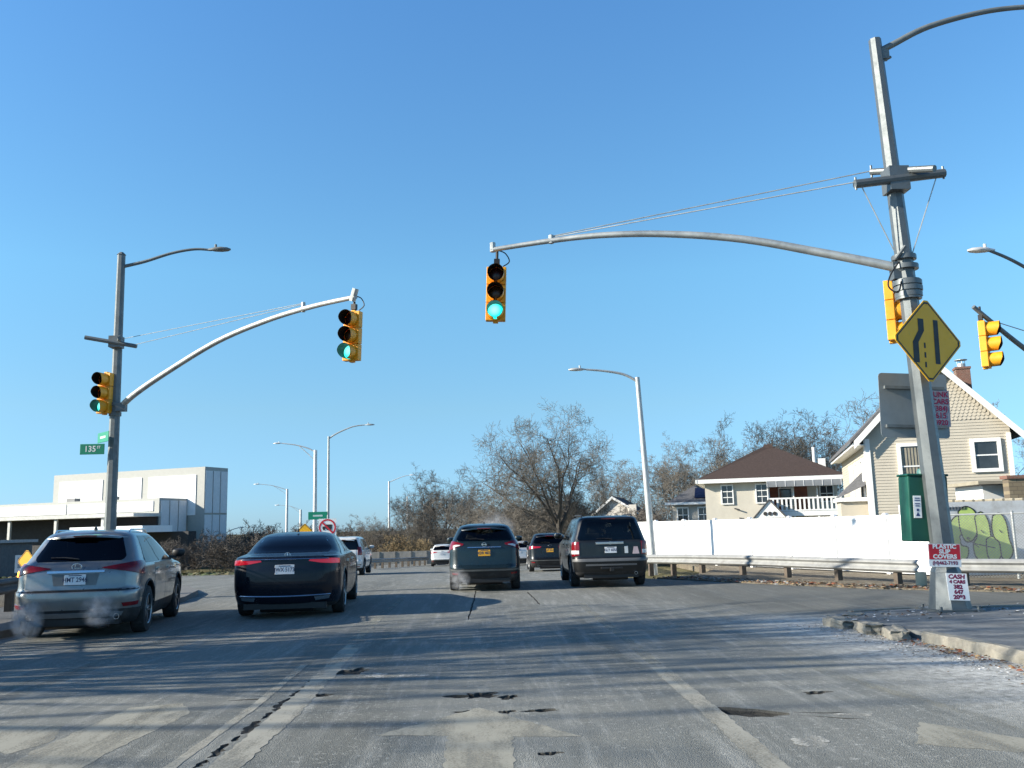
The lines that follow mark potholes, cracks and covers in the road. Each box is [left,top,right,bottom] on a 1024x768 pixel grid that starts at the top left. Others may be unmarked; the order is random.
pothole [705,707,790,717]
pothole [336,667,369,675]
